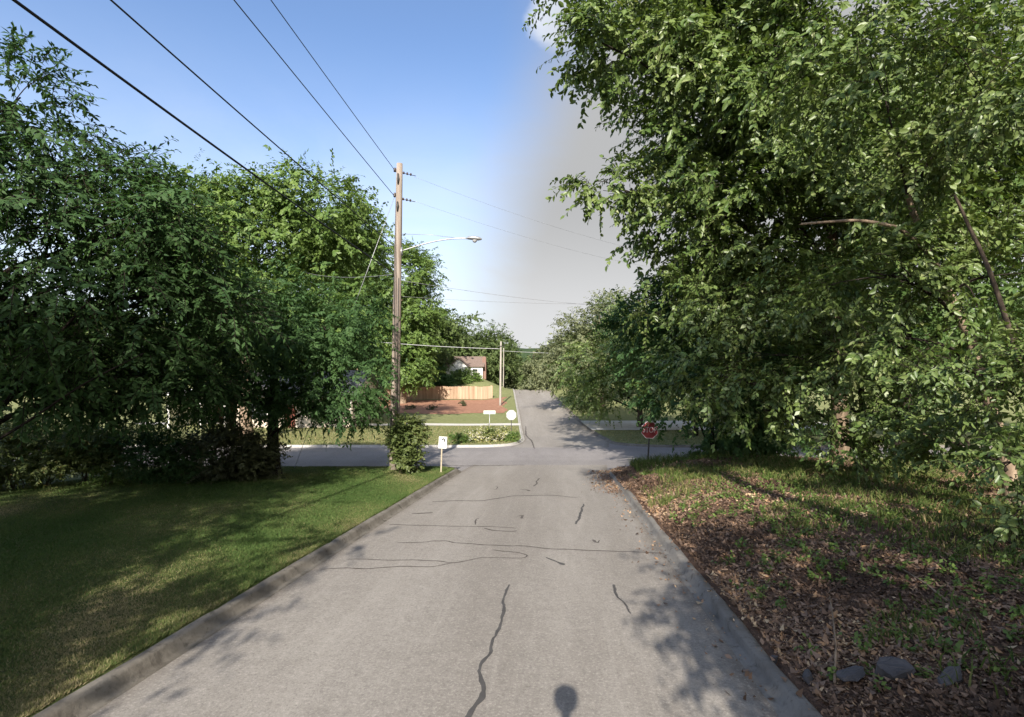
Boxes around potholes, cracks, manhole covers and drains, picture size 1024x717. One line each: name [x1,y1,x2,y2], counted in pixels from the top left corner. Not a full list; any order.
crack [328,478,663,569]
